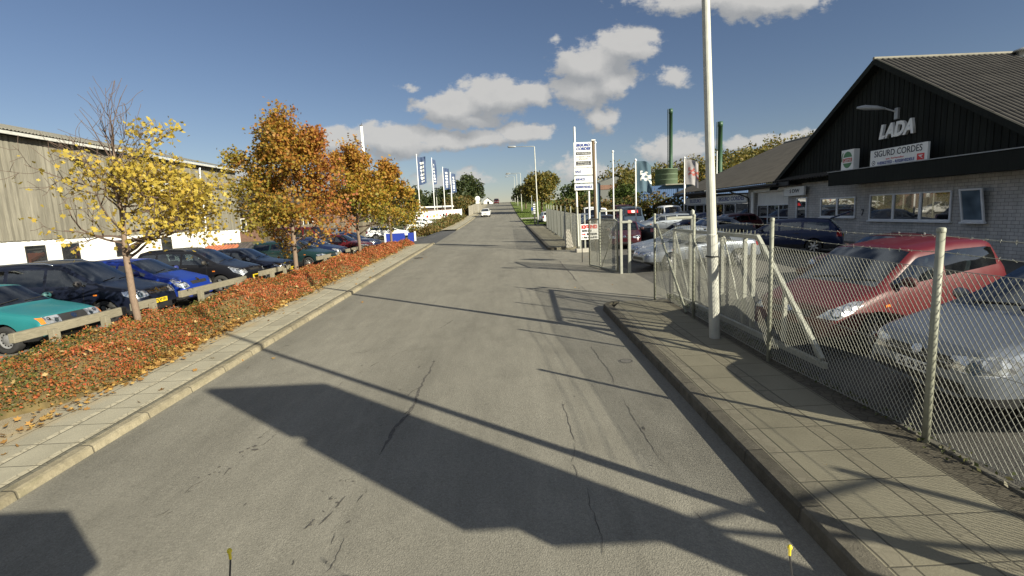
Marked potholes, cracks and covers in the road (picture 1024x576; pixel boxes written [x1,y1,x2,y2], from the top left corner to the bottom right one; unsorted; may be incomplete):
crack [359,338,435,455]
crack [563,404,604,555]
crack [292,478,367,572]
crack [186,431,276,492]
